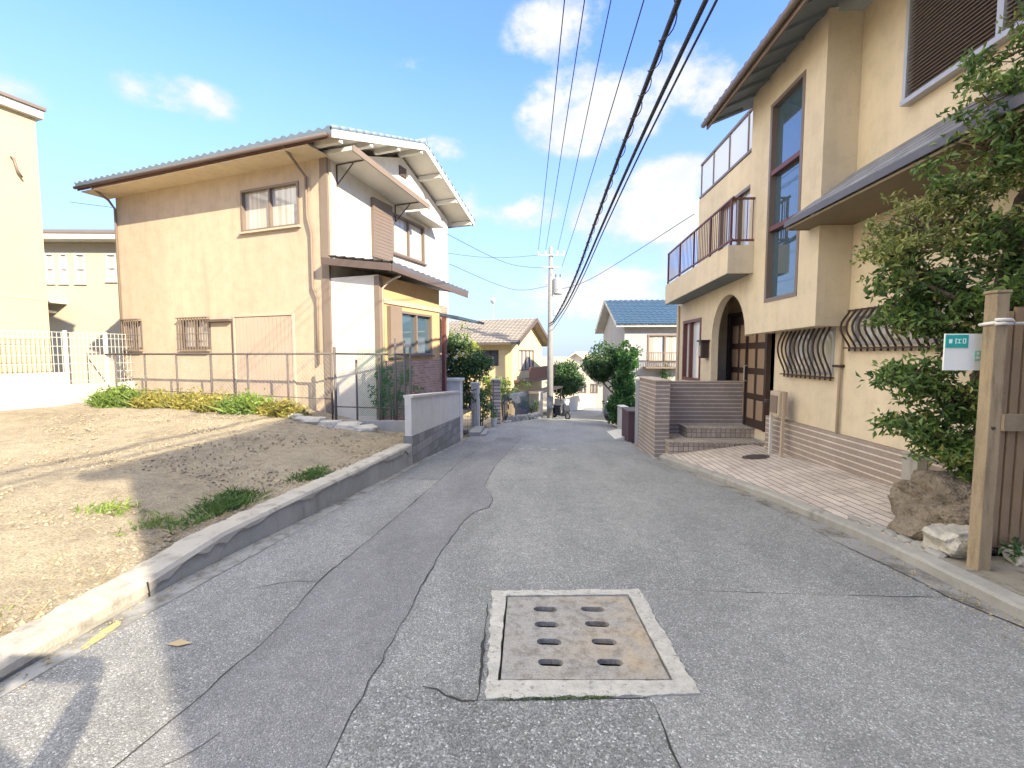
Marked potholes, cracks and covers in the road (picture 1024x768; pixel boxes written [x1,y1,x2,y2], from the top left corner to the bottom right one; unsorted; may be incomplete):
crack [383,604,645,702]
manhole cover [485,589,701,701]
